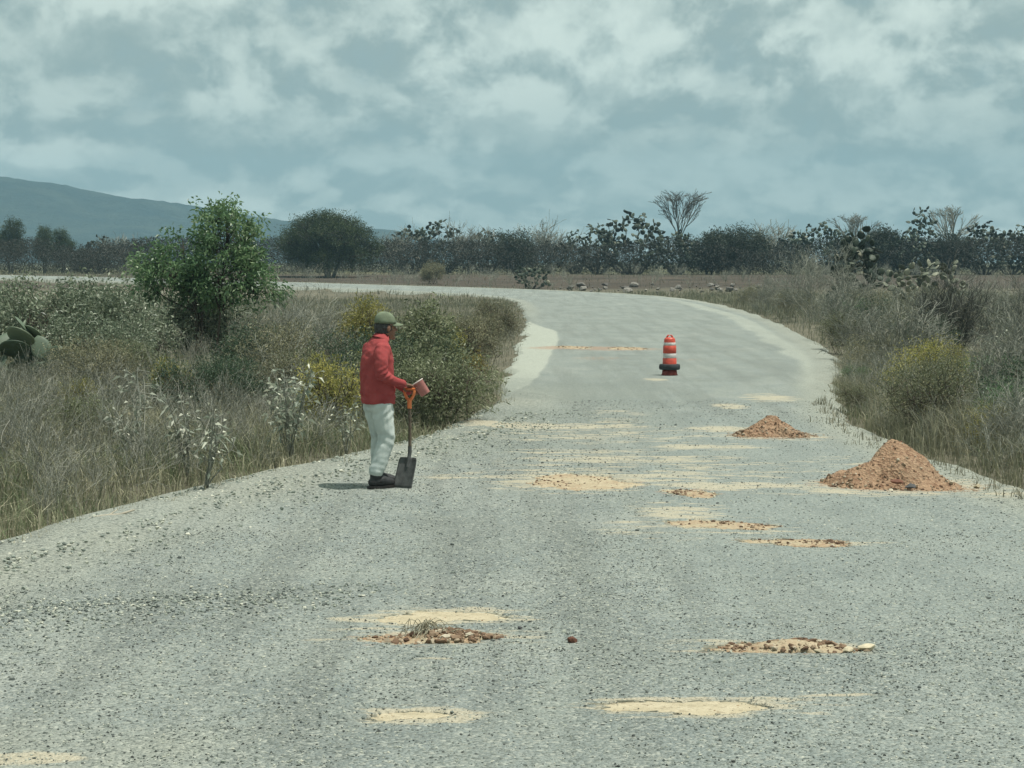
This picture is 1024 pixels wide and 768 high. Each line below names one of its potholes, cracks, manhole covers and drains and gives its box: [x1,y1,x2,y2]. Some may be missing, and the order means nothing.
pothole [730,538,853,548]
pothole [697,637,871,654]
pothole [659,488,721,498]
pothole [656,518,783,530]
pothole [351,618,507,645]
